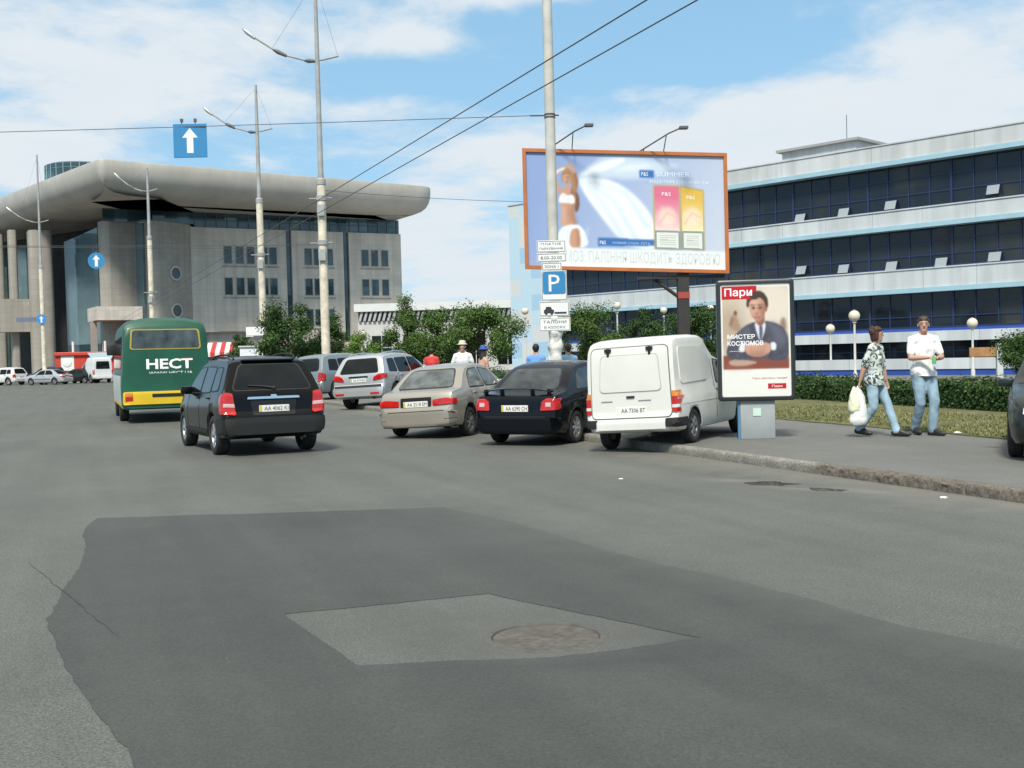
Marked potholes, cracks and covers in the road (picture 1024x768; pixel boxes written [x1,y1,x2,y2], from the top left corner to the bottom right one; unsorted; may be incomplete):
crack [29,562,120,638]
manhole cover [483,622,609,653]
